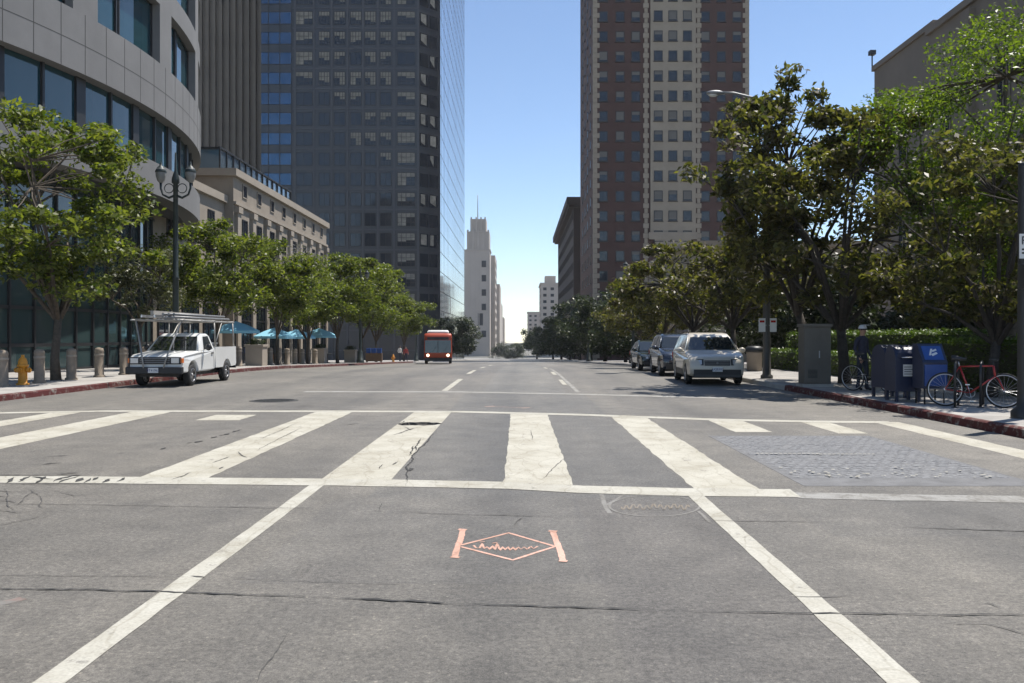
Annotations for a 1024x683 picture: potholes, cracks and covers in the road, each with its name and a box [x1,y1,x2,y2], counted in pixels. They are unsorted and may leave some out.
crack [257,632,288,682]
crack [171,423,303,480]
crack [0,452,571,525]
crack [379,421,436,485]
